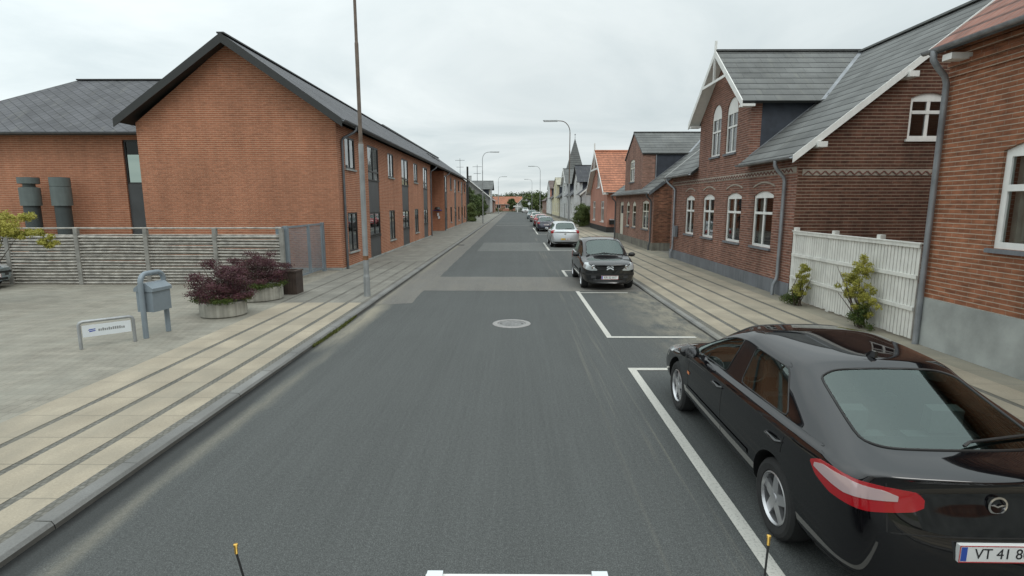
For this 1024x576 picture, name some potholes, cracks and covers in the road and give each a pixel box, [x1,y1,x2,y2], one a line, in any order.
manhole cover [493,319,531,328]
